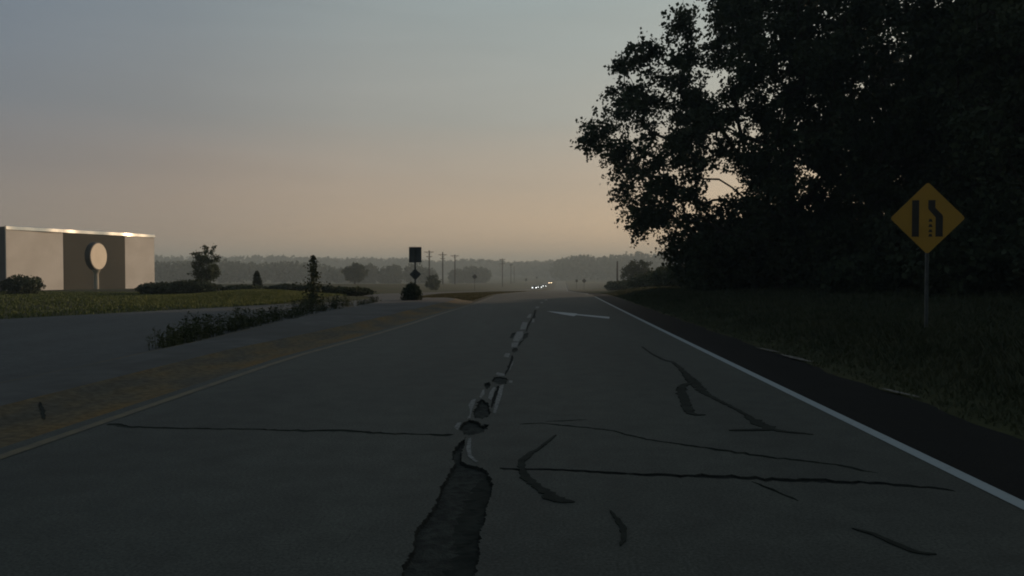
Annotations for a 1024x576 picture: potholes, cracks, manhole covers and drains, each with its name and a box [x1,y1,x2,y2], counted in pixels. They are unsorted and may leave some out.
crack [107,423,454,436]
pothole [459,420,489,436]
pothole [401,437,494,576]
pothole [473,399,492,419]
crack [500,420,954,501]
crack [491,319,532,408]
